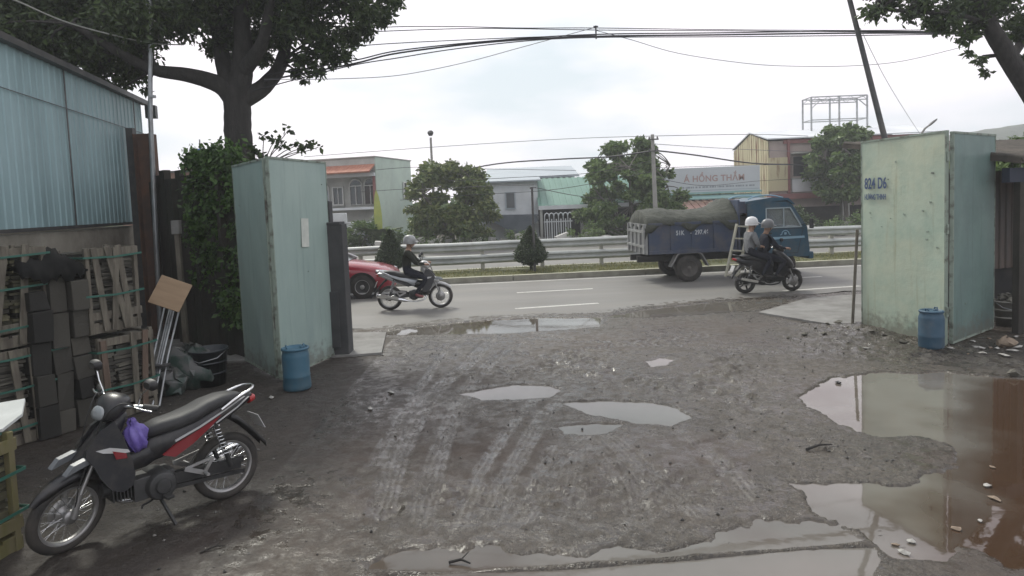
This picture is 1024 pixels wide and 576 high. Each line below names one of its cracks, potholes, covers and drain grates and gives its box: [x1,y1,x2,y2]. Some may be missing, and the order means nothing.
pothole [546,419,638,438]
pothole [344,506,922,576]
pothole [372,316,607,336]
pothole [552,396,705,428]
pothole [446,381,570,402]
pothole [767,367,1024,576]
